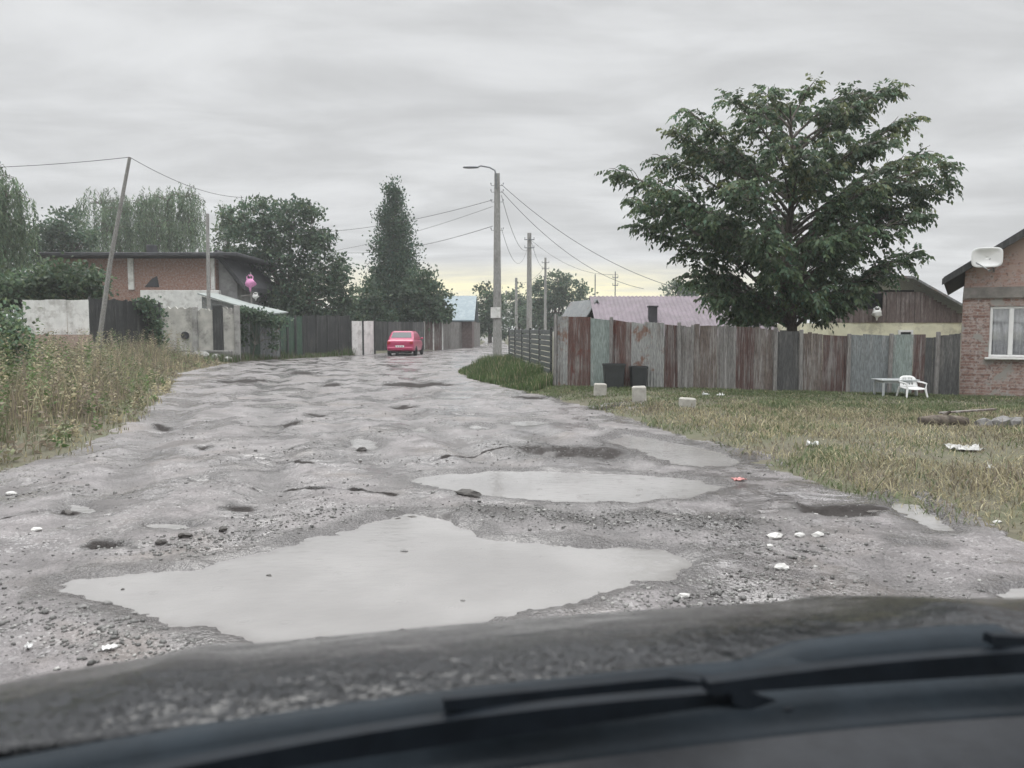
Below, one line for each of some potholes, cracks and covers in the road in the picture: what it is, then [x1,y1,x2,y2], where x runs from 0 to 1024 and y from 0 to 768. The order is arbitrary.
pothole [7,504,740,650]
pothole [758,501,908,522]
crack [417,443,542,464]
pothole [567,427,788,475]
pothole [377,463,764,512]
